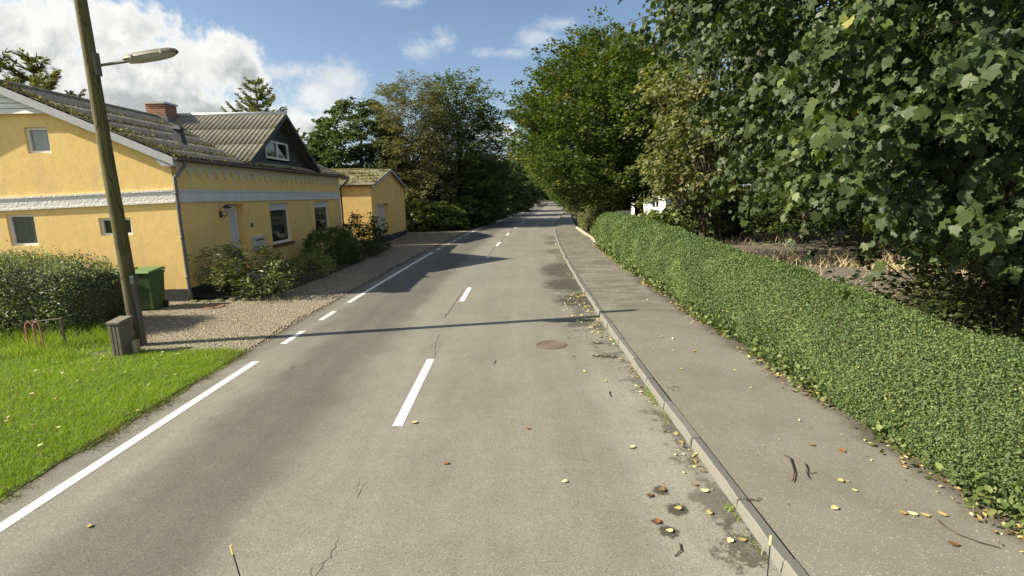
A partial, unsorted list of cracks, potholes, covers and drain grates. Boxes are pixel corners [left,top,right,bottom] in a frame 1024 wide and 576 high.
manhole cover [536,340,567,349]
